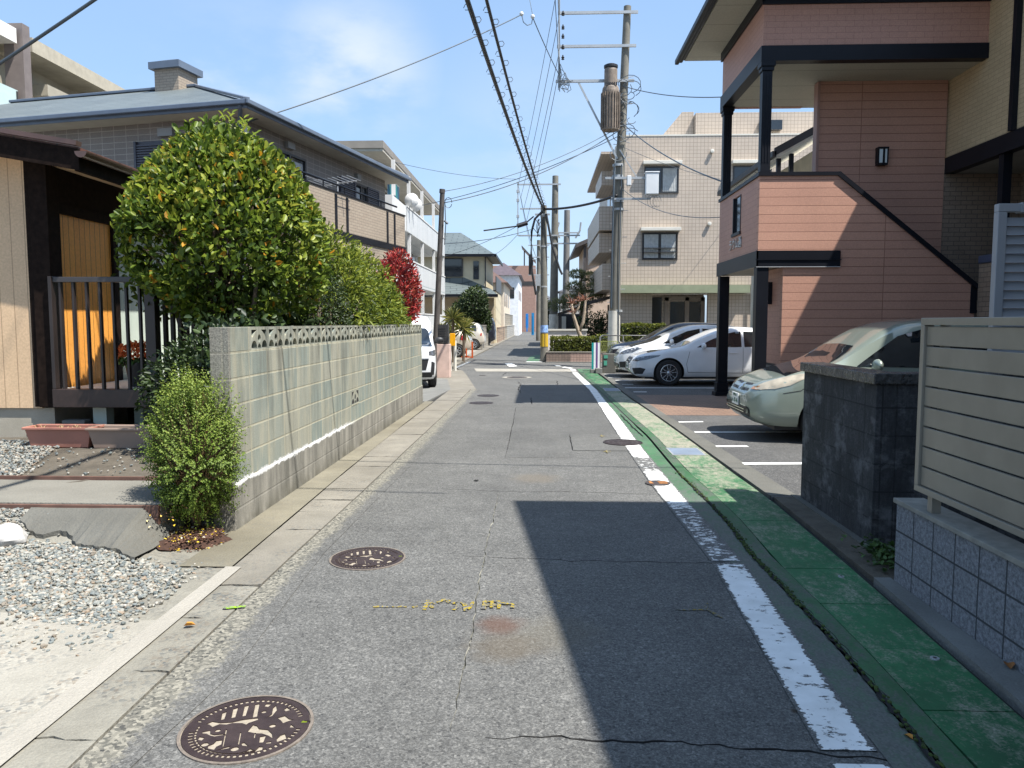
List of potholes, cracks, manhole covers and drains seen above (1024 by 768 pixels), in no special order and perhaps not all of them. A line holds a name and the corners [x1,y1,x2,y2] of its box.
manhole cover [176,695,314,765]
crack [471,414,945,768]
manhole cover [329,547,406,571]
